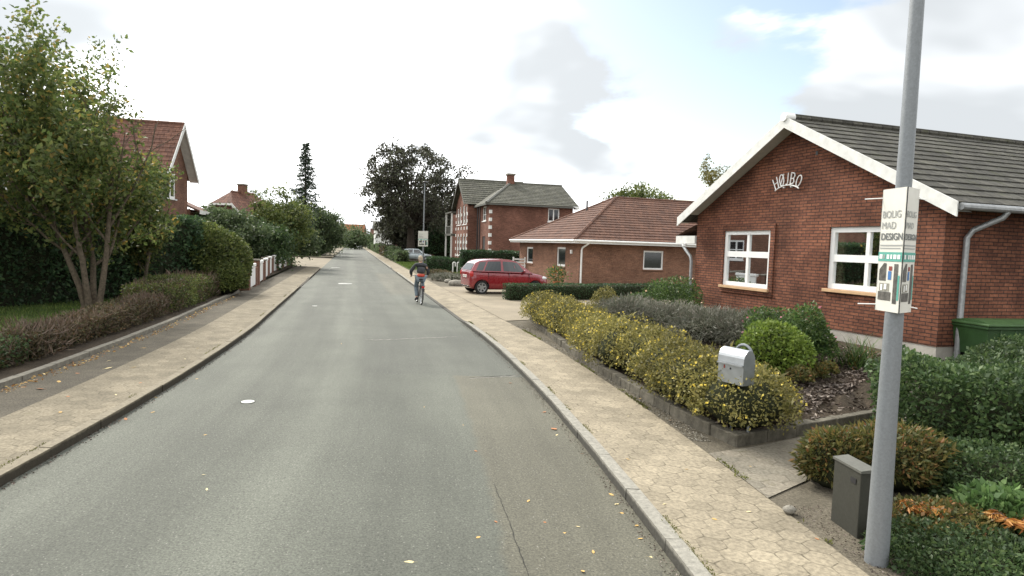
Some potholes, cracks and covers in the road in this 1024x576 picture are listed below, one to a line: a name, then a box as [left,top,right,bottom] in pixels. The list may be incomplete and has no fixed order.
crack [492,481,529,576]
